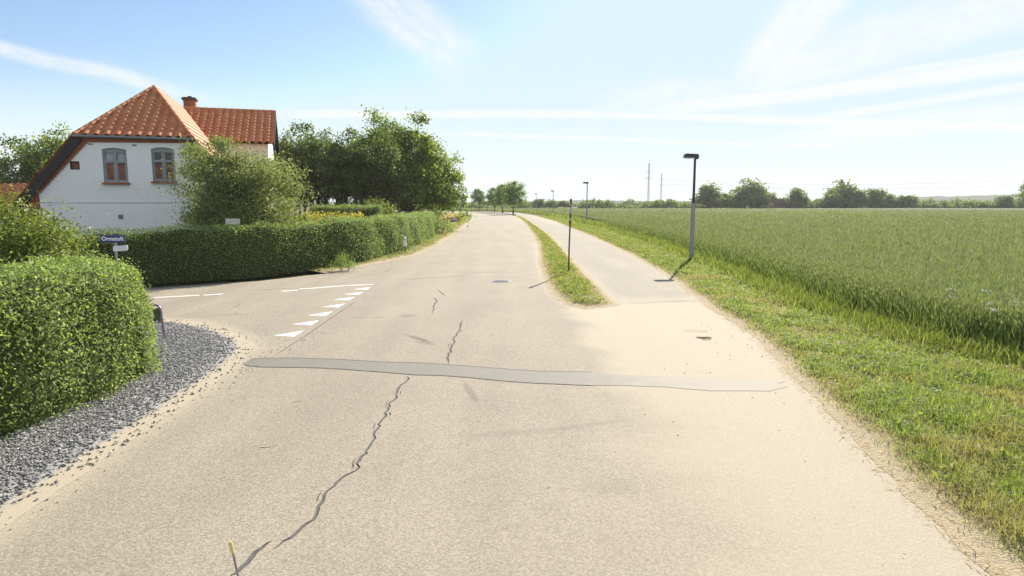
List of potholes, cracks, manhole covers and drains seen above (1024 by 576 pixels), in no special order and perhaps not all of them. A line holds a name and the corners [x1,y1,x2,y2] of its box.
crack [379,267,480,364]
crack [230,377,410,576]
